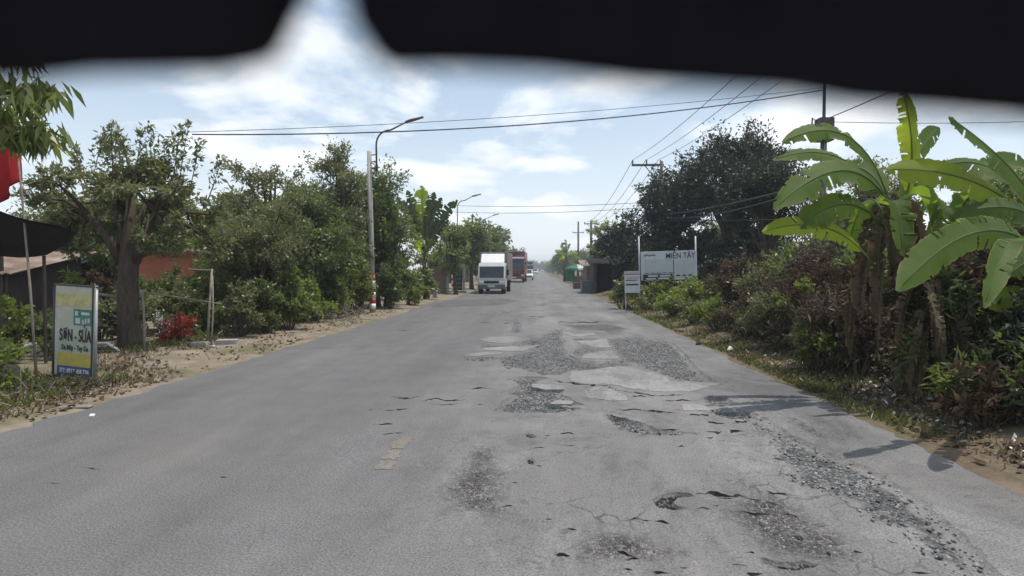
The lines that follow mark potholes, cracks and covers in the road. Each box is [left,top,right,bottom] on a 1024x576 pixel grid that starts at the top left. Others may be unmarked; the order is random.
pothole [607,337,718,382]
pothole [652,492,694,510]
crack [379,387,485,435]
pothole [599,411,701,435]
pothole [495,376,584,413]
pothole [561,404,705,429]
